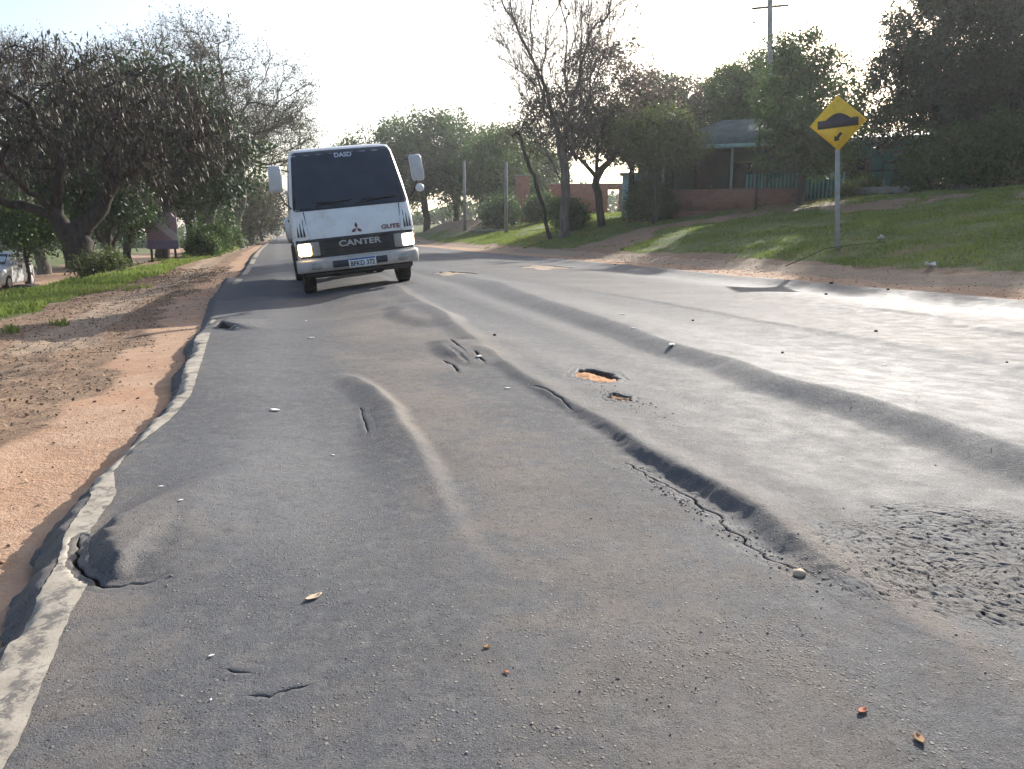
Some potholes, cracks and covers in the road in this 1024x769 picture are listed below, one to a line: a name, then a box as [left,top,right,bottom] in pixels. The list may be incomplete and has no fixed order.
crack [352,404,377,437]
pothole [565,368,628,384]
crack [202,659,330,708]
crack [433,339,496,374]
crack [525,382,585,415]
crack [615,460,1024,663]
pothole [601,391,638,403]
